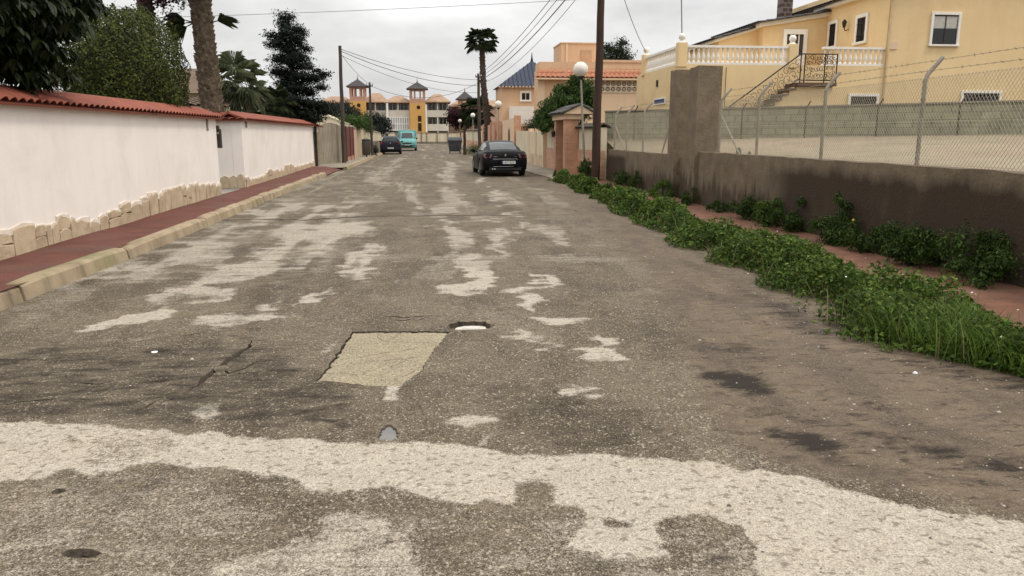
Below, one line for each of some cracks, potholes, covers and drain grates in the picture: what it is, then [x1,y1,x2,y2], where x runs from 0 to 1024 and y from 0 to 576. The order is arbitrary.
pothole [369,421,409,445]
crack [309,314,452,390]
pothole [52,545,111,564]
crack [0,331,273,415]
pothole [440,320,502,334]
